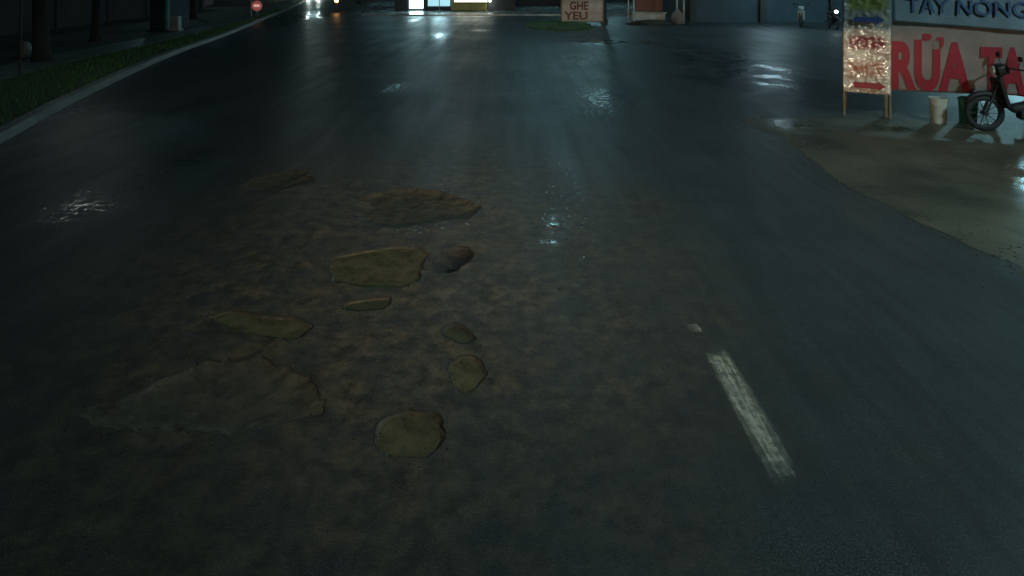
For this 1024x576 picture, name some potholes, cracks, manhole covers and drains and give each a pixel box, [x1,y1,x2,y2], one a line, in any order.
pothole [323,241,434,295]
pothole [339,185,495,235]
pothole [234,169,317,194]
pothole [424,244,481,279]
pothole [352,398,449,467]
pothole [435,319,479,348]
pothole [335,295,394,315]
pothole [200,307,317,344]
pothole [439,348,491,401]
